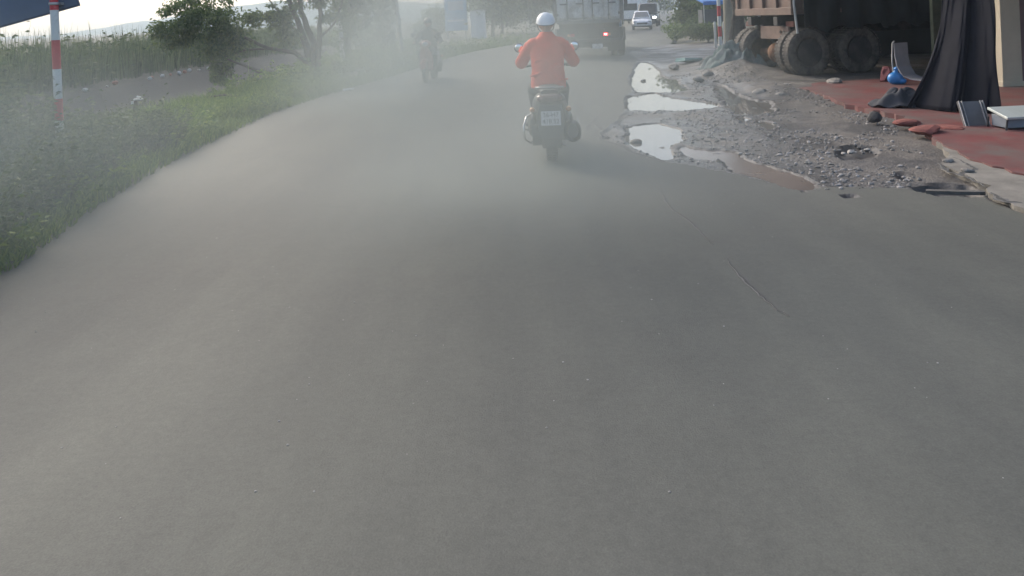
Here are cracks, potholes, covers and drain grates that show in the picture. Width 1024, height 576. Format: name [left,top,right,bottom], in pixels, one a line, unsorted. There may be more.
pothole [616,122,690,161]
pothole [622,92,721,112]
pothole [675,143,826,192]
crack [659,188,790,317]
pothole [626,61,694,93]
